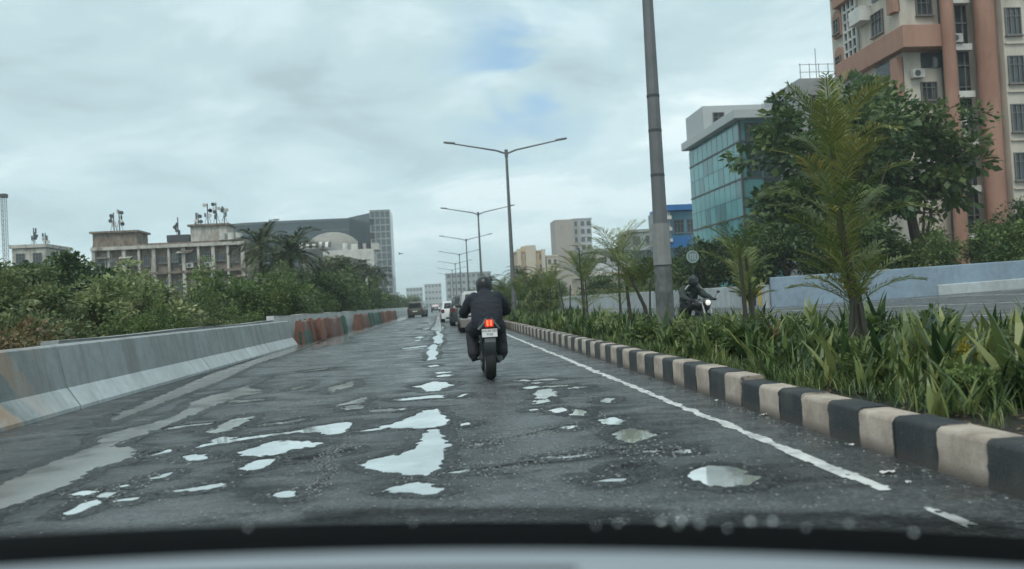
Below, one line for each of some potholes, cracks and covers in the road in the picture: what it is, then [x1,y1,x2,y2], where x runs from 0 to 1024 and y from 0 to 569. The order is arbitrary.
pothole [369,407,465,430]
pothole [556,407,600,418]
pothole [540,405,575,415]
pothole [420,342,447,361]
pothole [357,406,421,414]
pothole [583,415,642,427]
pothole [429,329,448,344]
pothole [340,426,463,479]
pothole [35,497,110,521]
pothole [668,461,783,493]
pothole [521,388,571,400]
pothole [359,477,464,499]
